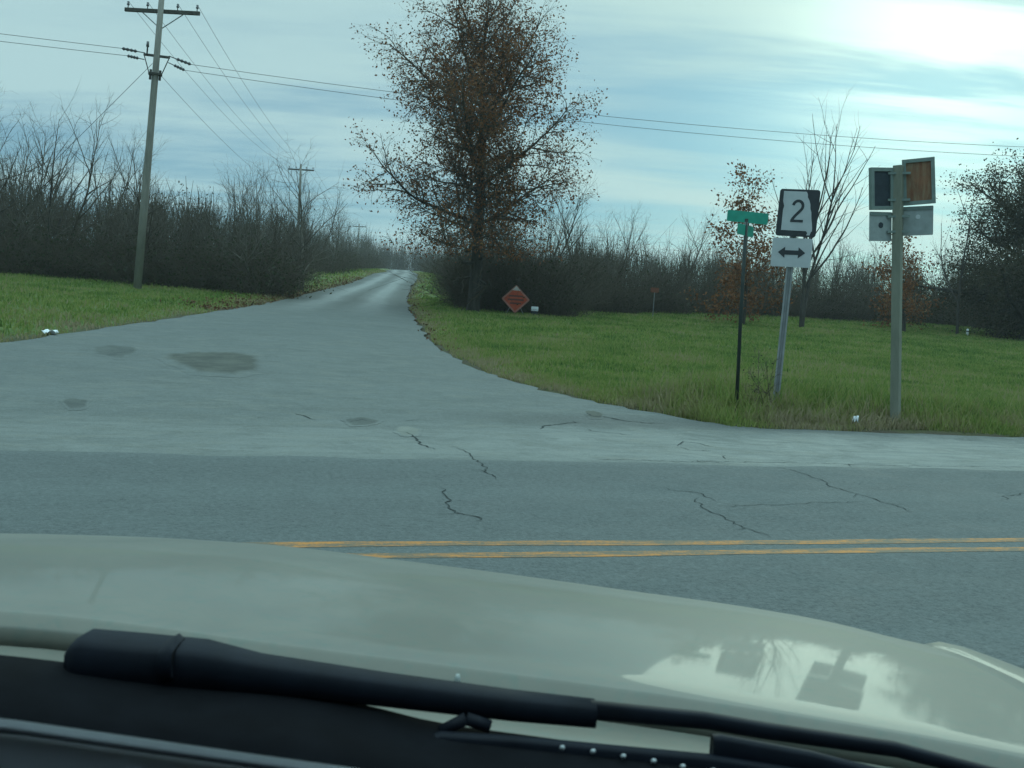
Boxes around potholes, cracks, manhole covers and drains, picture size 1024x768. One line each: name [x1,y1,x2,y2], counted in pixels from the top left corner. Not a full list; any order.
crack [669,467,909,535]
crack [427,489,482,522]
